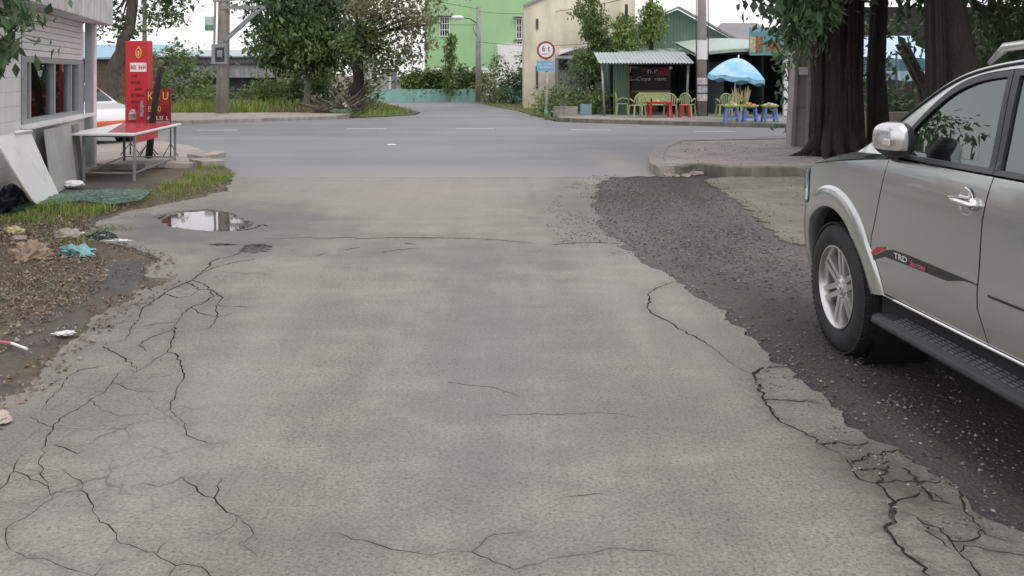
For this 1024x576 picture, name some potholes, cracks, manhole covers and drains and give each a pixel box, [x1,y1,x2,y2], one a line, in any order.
crack [448,382,639,418]
pothole [153,209,255,231]
crack [0,252,257,576]
pothole [240,244,273,254]
crack [647,281,1024,576]
crack [238,225,621,256]
crack [339,532,672,570]
